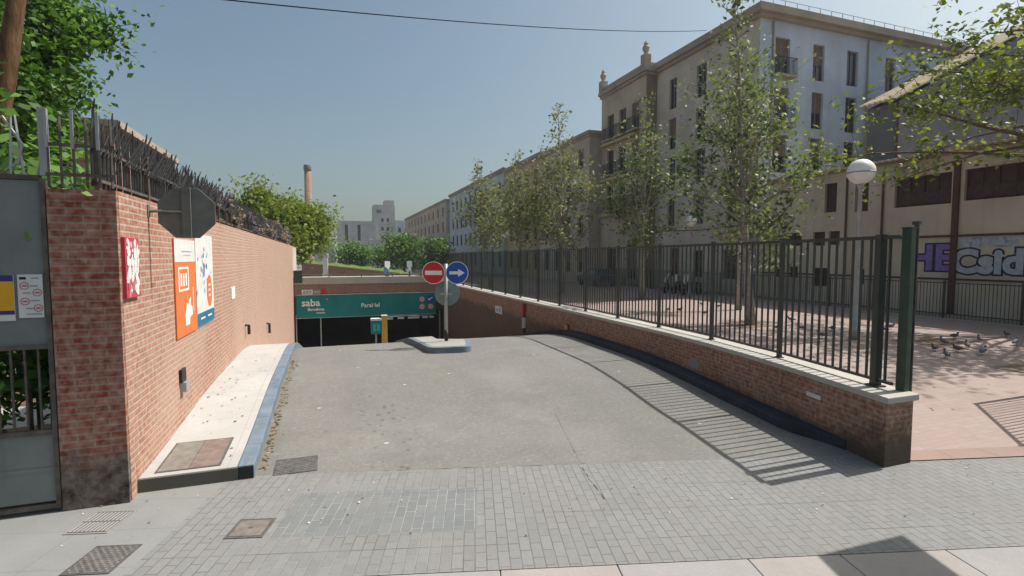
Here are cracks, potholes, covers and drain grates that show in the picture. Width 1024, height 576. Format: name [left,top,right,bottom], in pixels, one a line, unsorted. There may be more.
manhole cover [154,437,234,474]
drain grate [62,510,137,535]
manhole cover [223,518,277,539]
manhole cover [58,544,142,576]
